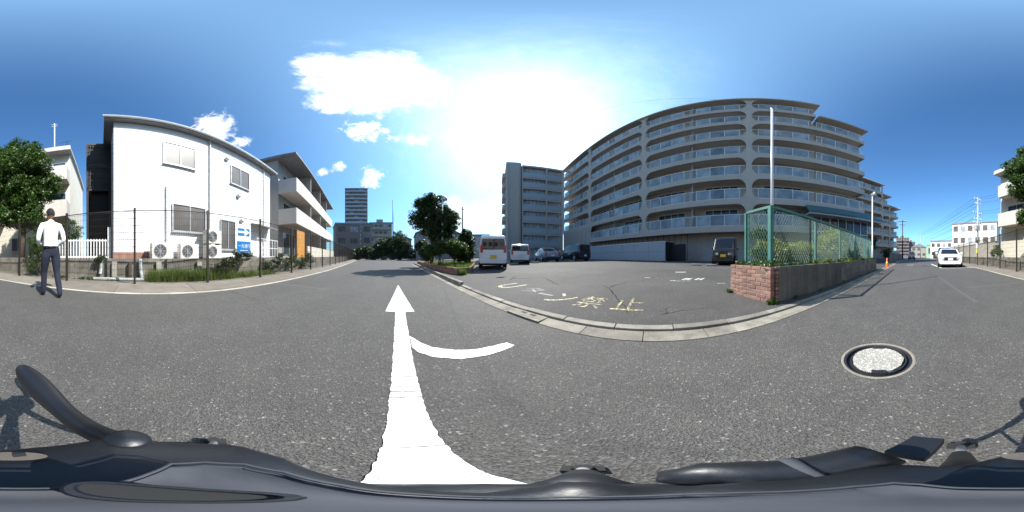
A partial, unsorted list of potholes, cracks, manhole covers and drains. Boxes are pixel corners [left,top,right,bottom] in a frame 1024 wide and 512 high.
manhole cover [841,343,916,379]
